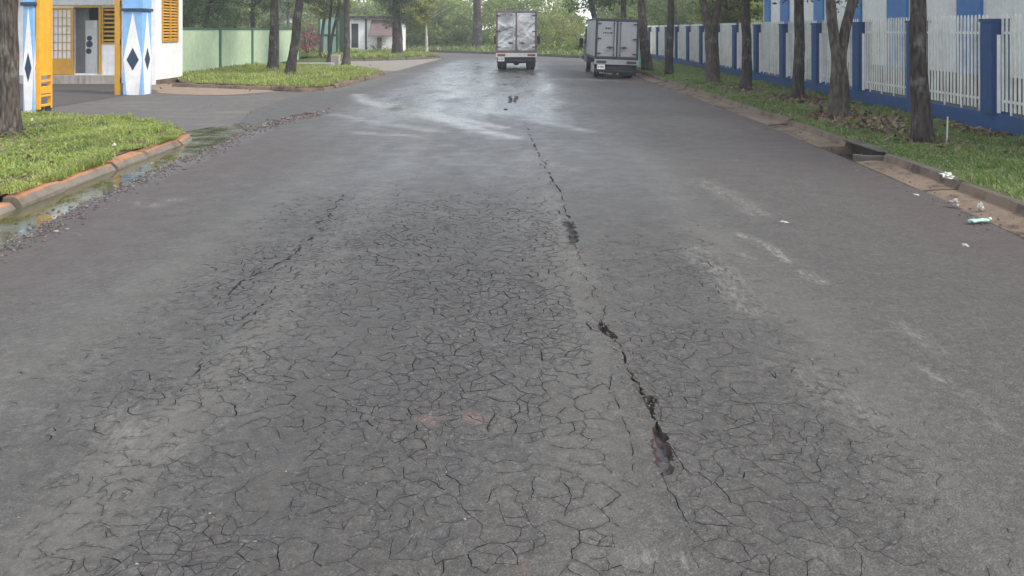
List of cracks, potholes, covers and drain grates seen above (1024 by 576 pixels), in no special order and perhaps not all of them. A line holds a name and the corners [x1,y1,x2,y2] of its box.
pothole [597,322,618,340]
drain grate [837,139,890,162]
pothole [650,424,676,478]
crack [18,174,656,576]
